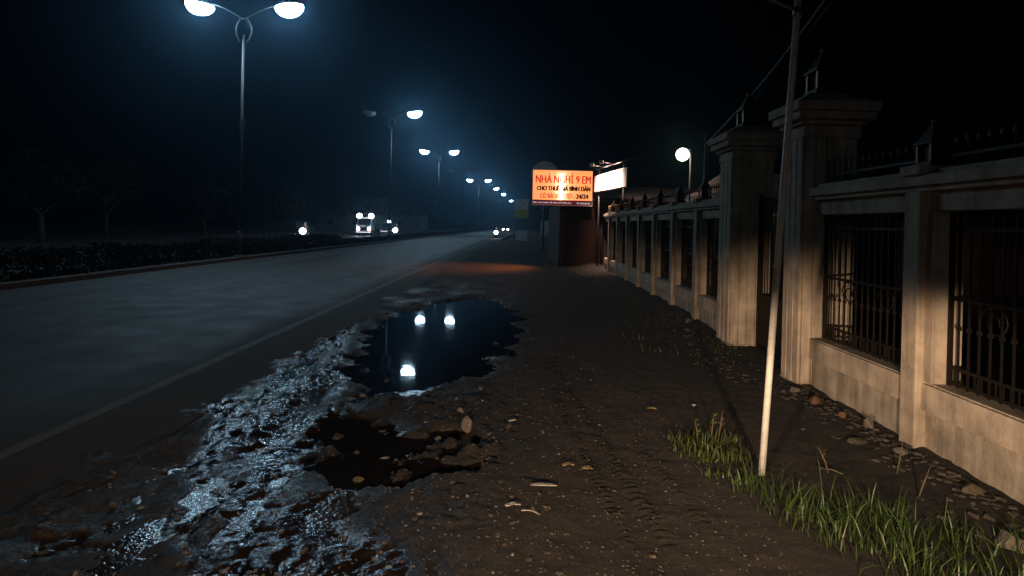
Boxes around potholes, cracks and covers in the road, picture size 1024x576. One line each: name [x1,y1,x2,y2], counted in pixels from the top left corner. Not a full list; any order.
pothole [339,295,534,396]
pothole [282,408,522,500]
